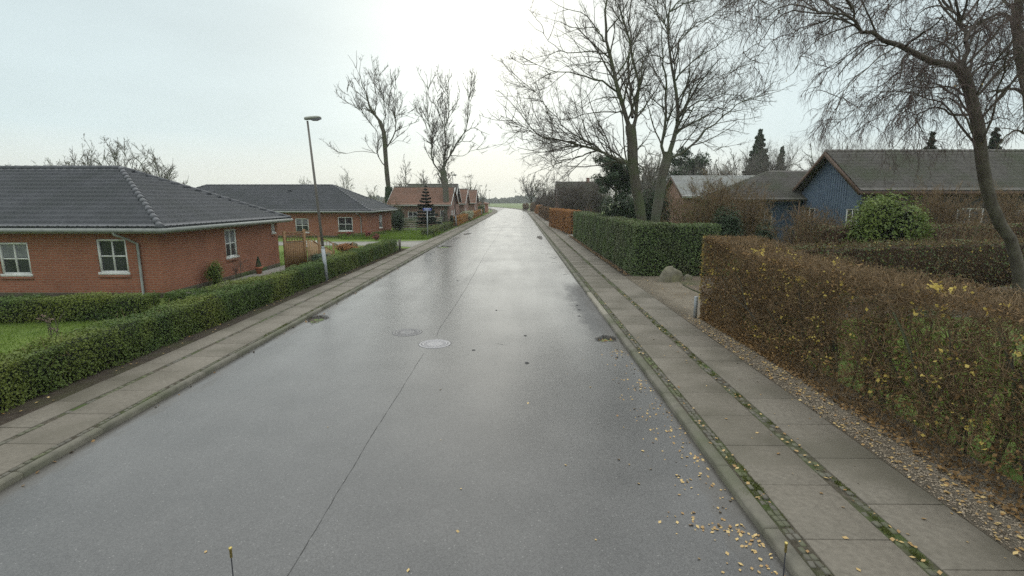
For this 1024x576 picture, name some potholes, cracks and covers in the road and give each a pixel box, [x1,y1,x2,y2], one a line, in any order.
manhole cover [418,339,451,348]
manhole cover [392,328,422,336]
